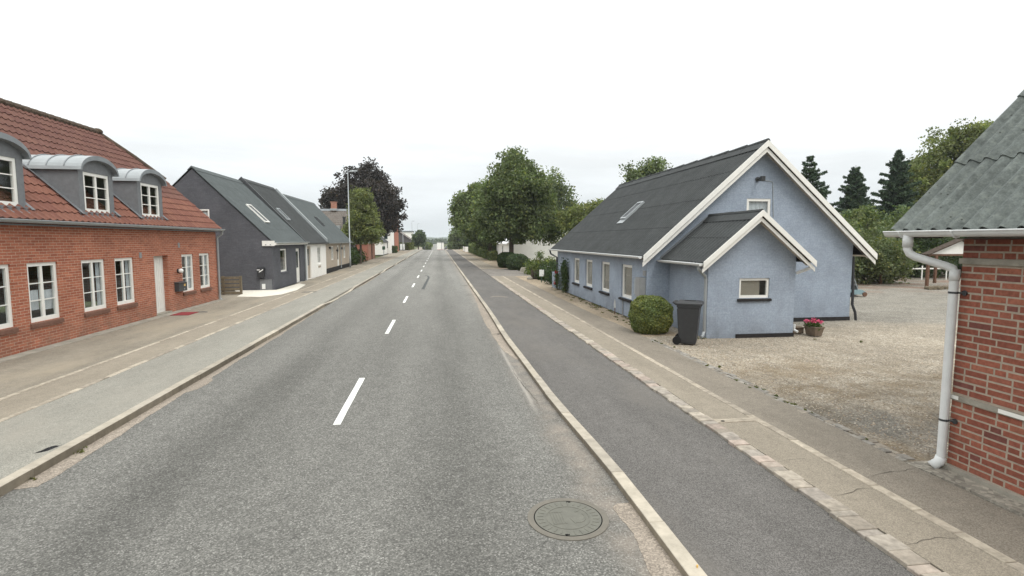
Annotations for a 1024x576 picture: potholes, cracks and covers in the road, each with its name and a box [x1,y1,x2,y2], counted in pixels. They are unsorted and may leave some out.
manhole cover [528,498,609,541]
